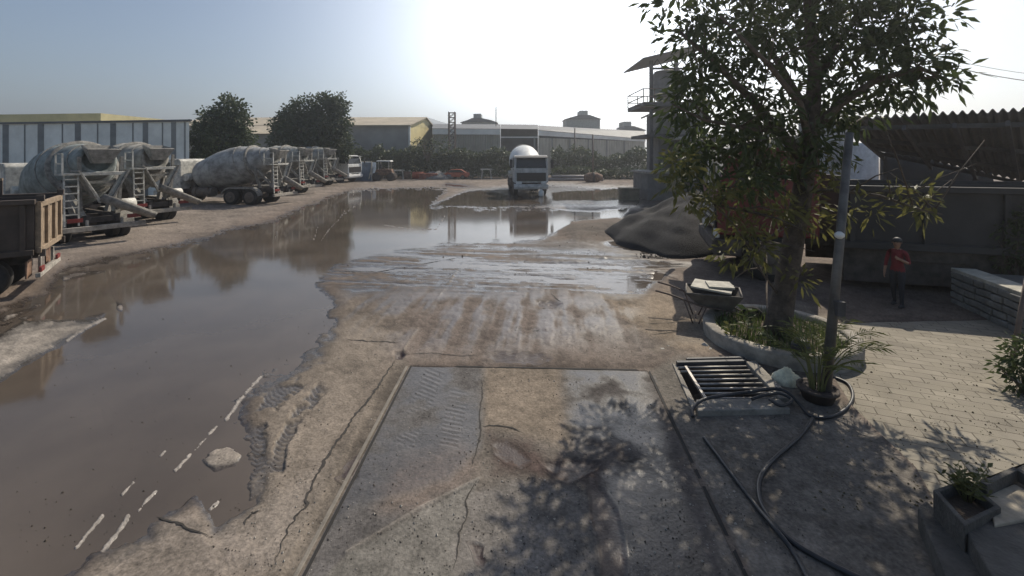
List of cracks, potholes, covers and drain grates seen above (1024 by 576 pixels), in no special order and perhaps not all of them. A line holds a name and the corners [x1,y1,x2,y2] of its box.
pothole [490,438,534,470]
crack [453,381,521,568]
crack [250,360,395,563]
drain grate [672,356,793,416]
